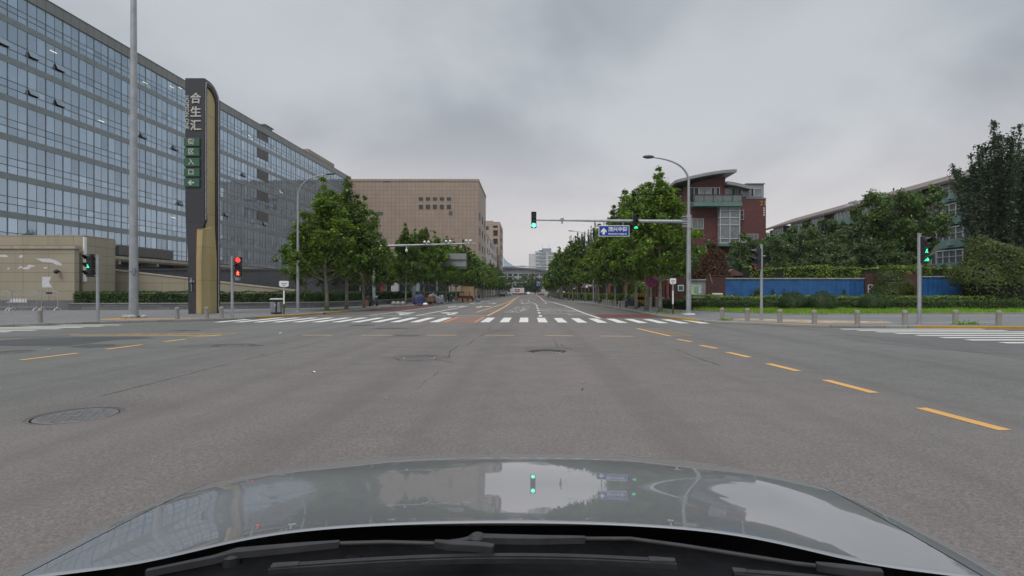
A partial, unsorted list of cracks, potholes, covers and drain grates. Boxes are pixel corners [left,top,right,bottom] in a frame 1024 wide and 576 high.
manhole cover [23,407,125,425]
crack [395,321,518,387]
crack [102,335,349,396]
